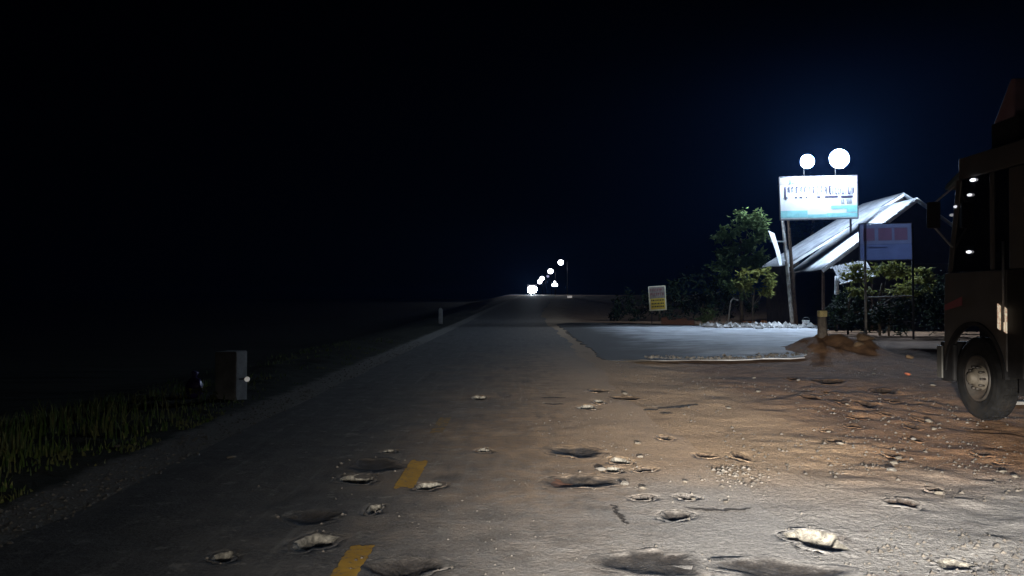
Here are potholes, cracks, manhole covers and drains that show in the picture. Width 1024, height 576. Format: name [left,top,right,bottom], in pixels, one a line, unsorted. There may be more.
pothole [541,445,610,461]
crack [643,404,698,414]
pothole [538,473,622,489]
pothole [776,527,864,558]
pothole [655,510,697,523]
pothole [585,547,712,576]
crack [611,504,629,524]
pothole [357,553,458,576]
pothole [340,457,408,479]
pothole [275,510,348,527]
